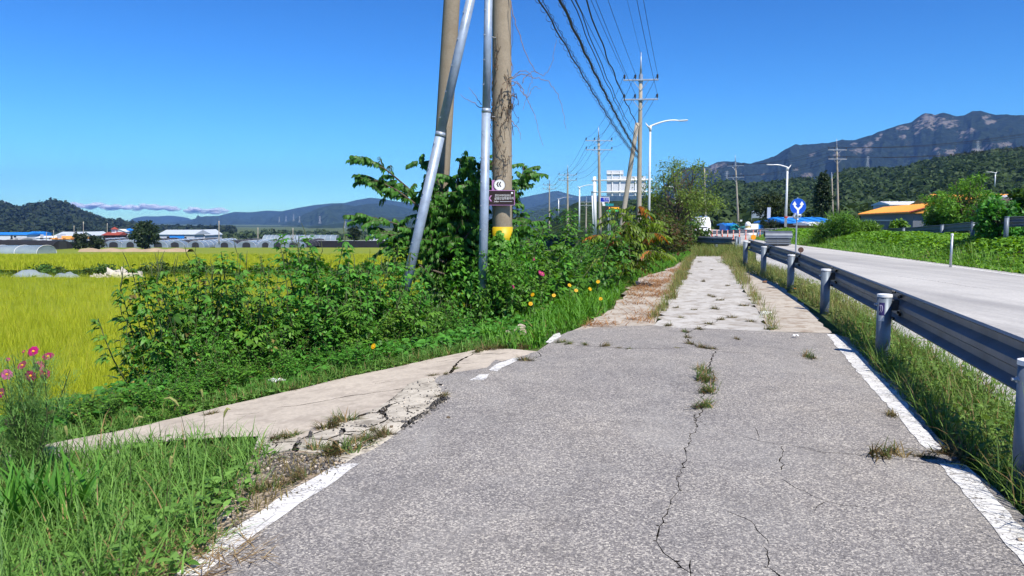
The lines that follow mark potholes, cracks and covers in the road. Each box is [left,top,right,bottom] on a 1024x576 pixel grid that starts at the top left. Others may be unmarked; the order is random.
crack [266,381,422,452]
crack [728,511,780,576]
crack [536,321,736,576]
crack [724,429,933,510]
